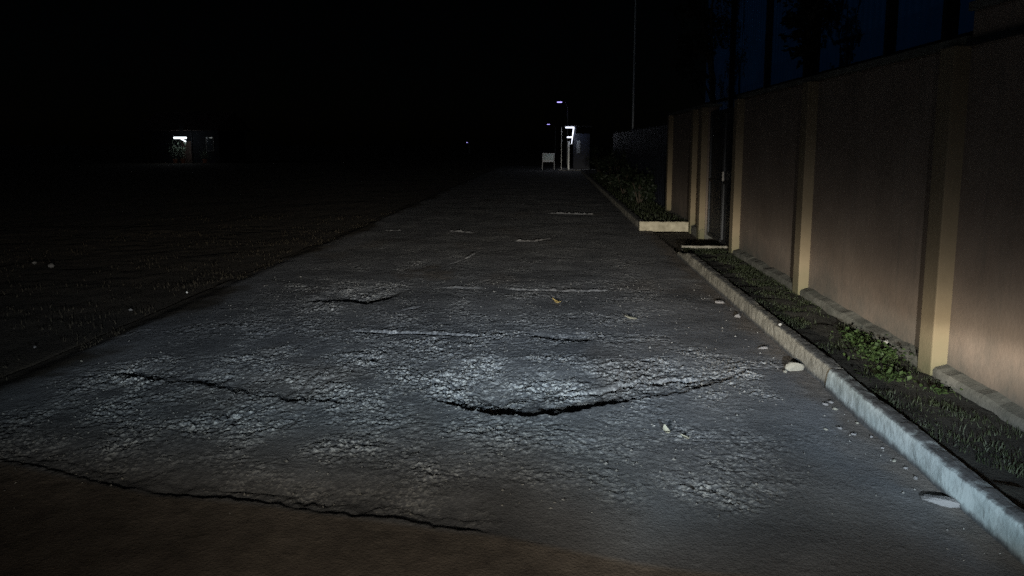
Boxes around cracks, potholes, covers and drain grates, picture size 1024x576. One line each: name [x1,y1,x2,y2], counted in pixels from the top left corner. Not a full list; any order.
crack [349,304,484,338]
crack [0,427,513,539]
